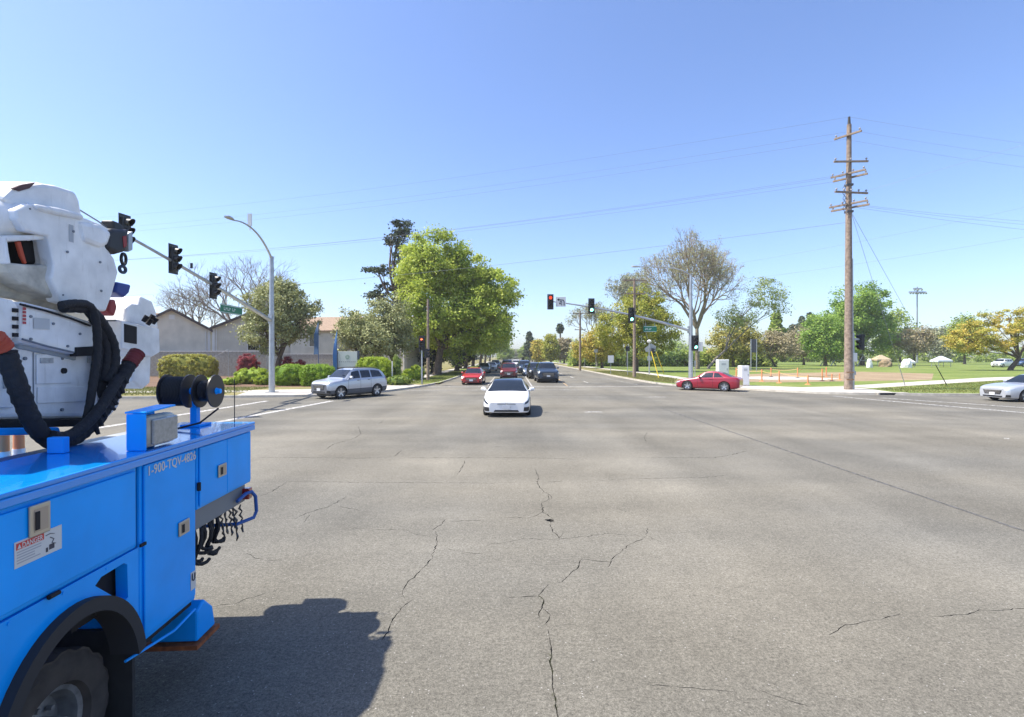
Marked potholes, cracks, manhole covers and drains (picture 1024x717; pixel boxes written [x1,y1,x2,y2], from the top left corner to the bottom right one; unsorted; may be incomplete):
crack [831,608,1024,634]
crack [264,462,716,717]
crack [648,684,810,707]
